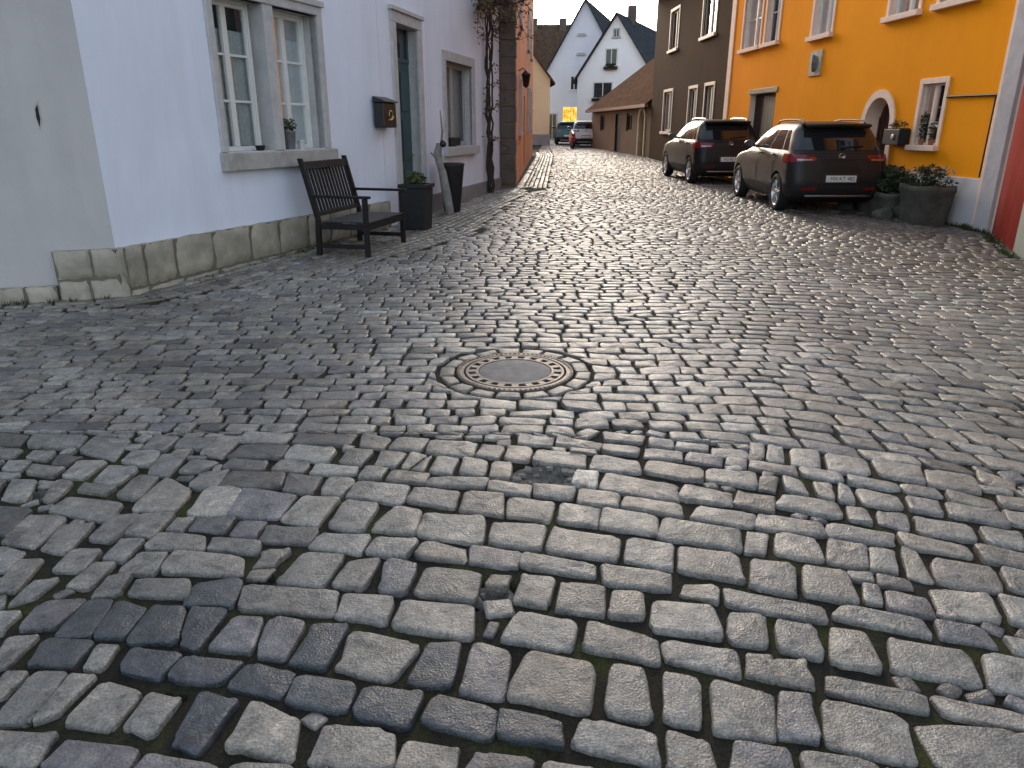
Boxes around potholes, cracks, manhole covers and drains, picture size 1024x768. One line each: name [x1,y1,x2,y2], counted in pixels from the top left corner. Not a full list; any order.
manhole cover [457,352,573,394]
pothole [510,466,579,495]
